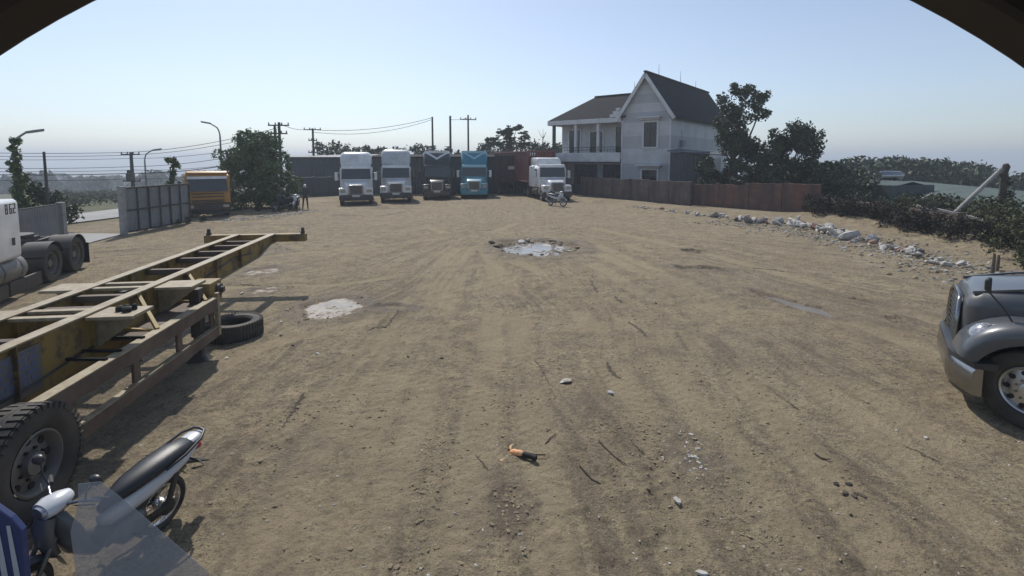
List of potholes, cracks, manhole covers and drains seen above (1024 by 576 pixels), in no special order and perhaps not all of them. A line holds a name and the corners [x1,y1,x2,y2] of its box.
pothole [488,237,591,258]
pothole [750,289,842,318]
